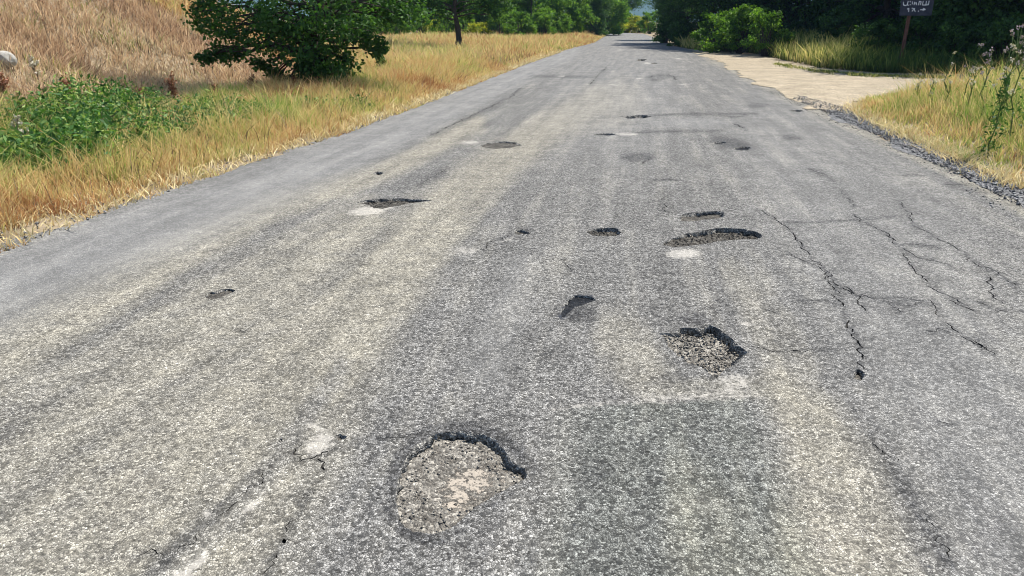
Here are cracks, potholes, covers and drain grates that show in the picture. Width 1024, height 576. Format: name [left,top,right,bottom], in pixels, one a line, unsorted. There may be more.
pothole [660,325,750,378]
pothole [663,228,763,247]
pothole [480,141,522,149]
pothole [560,295,596,318]
pothole [679,211,725,221]
crack [871,442,951,557]
pothole [395,431,527,534]
crack [293,443,331,470]
pothole [205,289,235,299]
pothole [357,198,431,209]
pothole [586,228,621,236]
crack [762,169,1016,369]
